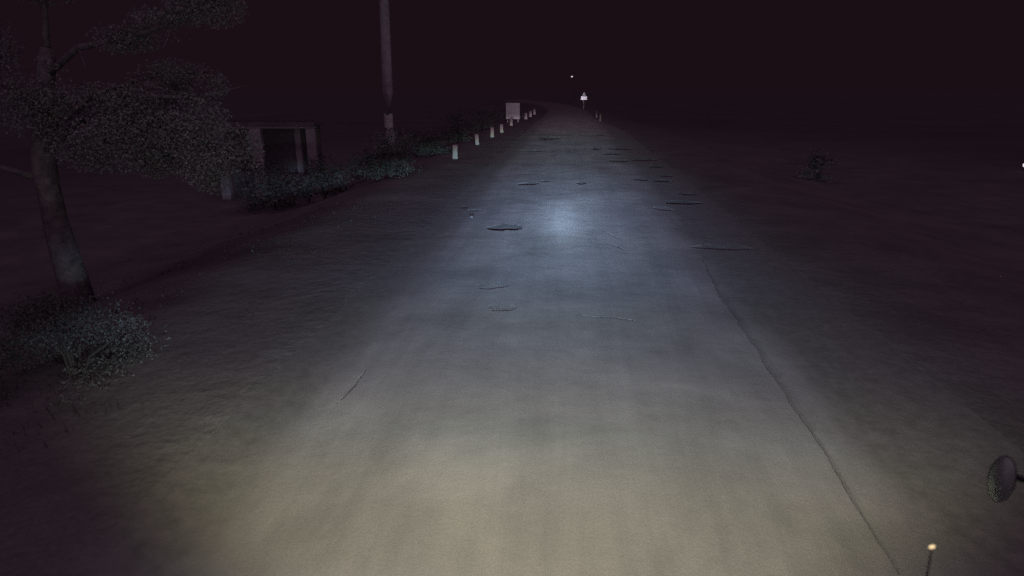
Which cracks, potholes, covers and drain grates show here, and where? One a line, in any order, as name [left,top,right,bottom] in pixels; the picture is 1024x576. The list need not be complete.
crack [575,313,636,321]
crack [703,260,903,576]
pothole [486,223,523,231]
crack [337,369,366,403]
pothole [488,303,518,311]
